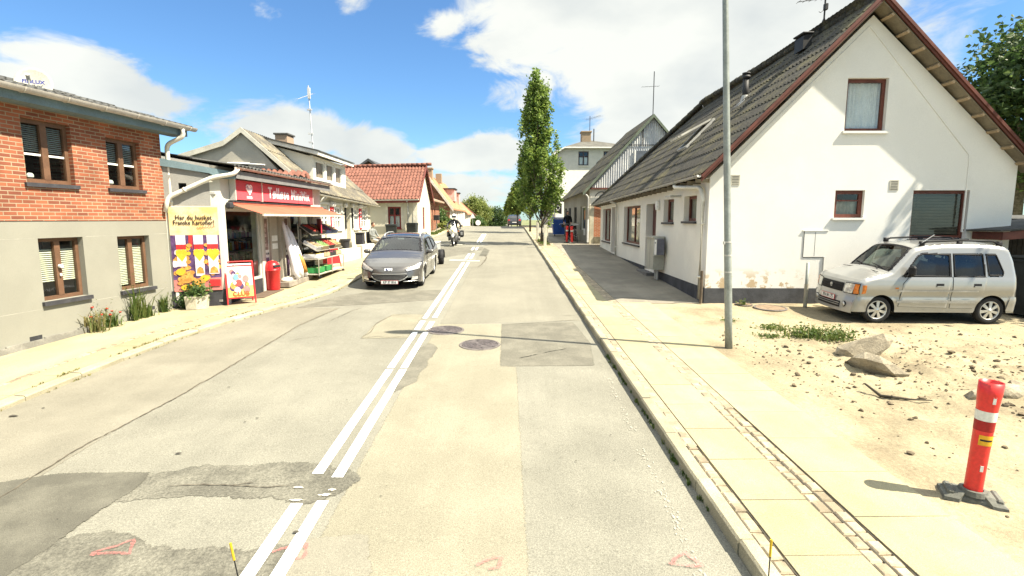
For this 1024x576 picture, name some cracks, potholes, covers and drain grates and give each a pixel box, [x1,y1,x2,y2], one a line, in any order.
manhole cover [427,326,464,335]
manhole cover [459,339,500,350]
